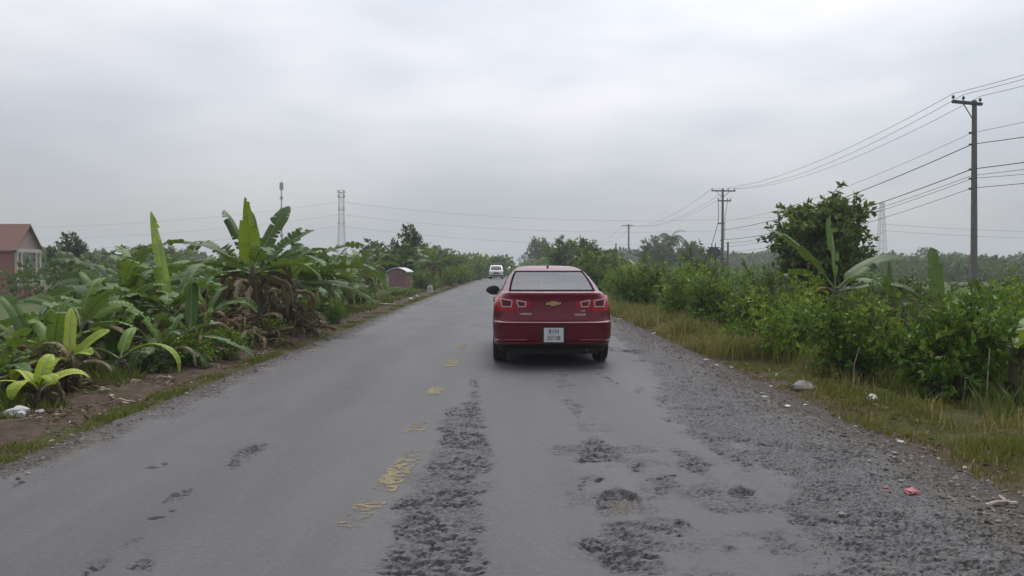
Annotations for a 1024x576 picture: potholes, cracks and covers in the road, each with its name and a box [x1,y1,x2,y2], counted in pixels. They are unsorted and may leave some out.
pothole [665,445,716,476]
pothole [573,518,702,576]
pothole [124,549,158,575]
pothole [572,434,633,471]
pothole [640,472,686,498]
pothole [591,487,647,518]
pothole [728,485,758,501]
pothole [374,374,504,576]
pothole [221,443,275,470]
